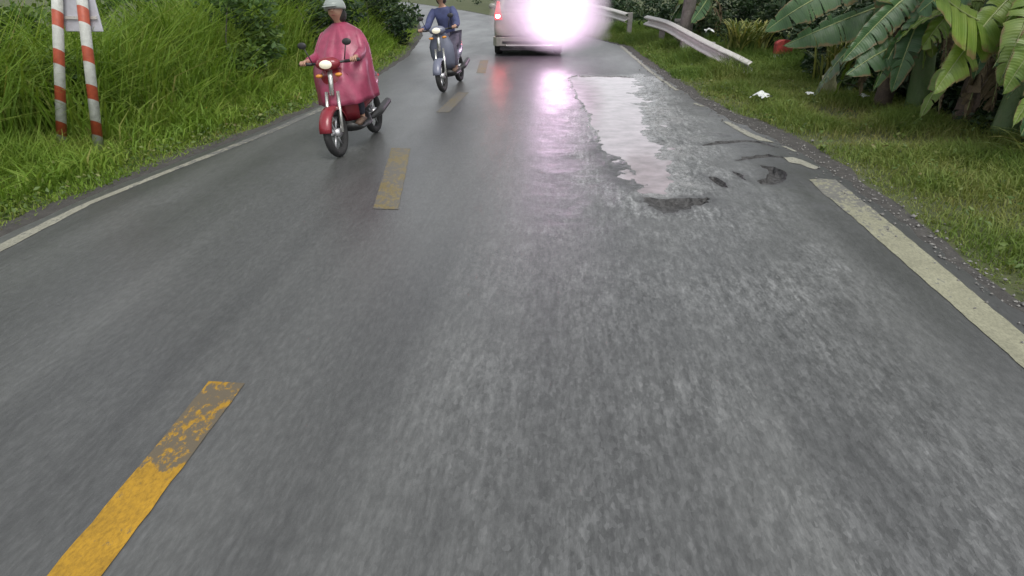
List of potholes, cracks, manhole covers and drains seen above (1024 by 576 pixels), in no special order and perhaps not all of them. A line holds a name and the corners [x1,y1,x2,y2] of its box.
crack [702,140,784,180]
pothole [643,197,710,214]
pothole [757,165,787,185]
